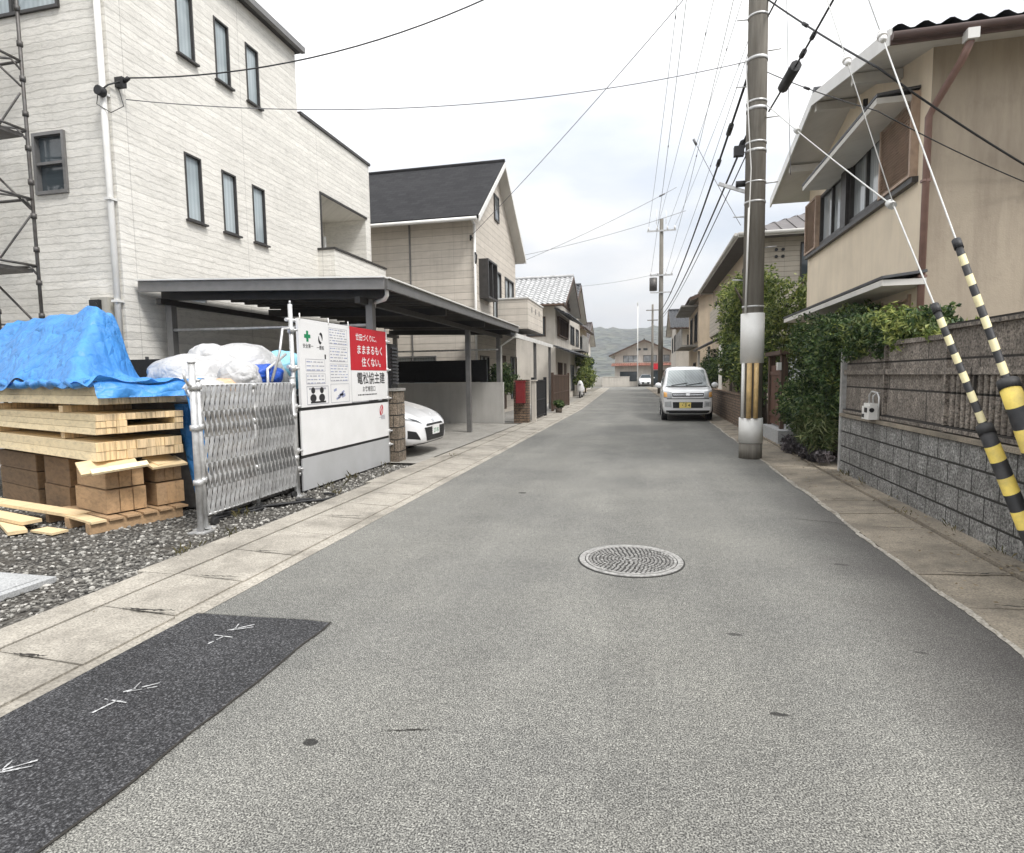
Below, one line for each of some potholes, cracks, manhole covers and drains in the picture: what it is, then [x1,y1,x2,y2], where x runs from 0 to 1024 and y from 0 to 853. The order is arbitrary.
manhole cover [578,545,685,578]
